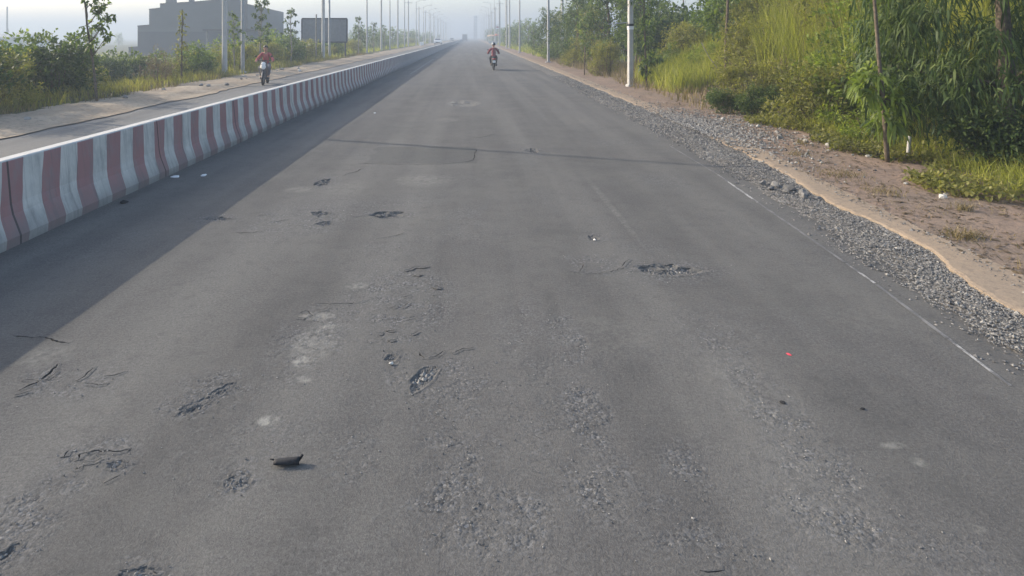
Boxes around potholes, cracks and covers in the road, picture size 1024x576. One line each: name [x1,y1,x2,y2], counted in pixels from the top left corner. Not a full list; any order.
crack [10,334,71,345]
crack [378,265,475,360]
crack [59,447,132,485]
crack [13,364,128,397]
pothole [220,473,240,491]
pothole [228,475,255,491]
pothole [310,178,335,187]
pothole [365,211,407,219]
pothole [174,394,215,417]
pothole [406,365,442,396]
pothole [631,262,713,277]
